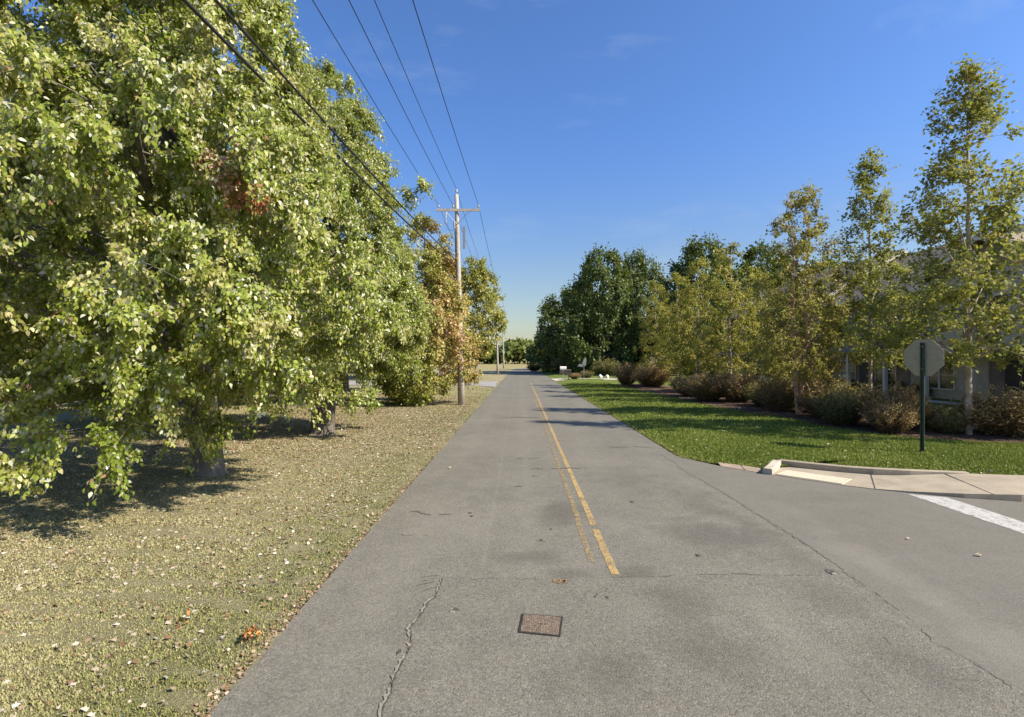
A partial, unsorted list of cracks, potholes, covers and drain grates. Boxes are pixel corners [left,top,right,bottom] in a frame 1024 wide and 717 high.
crack [378,575,443,717]
utility cover [518,613,563,637]
